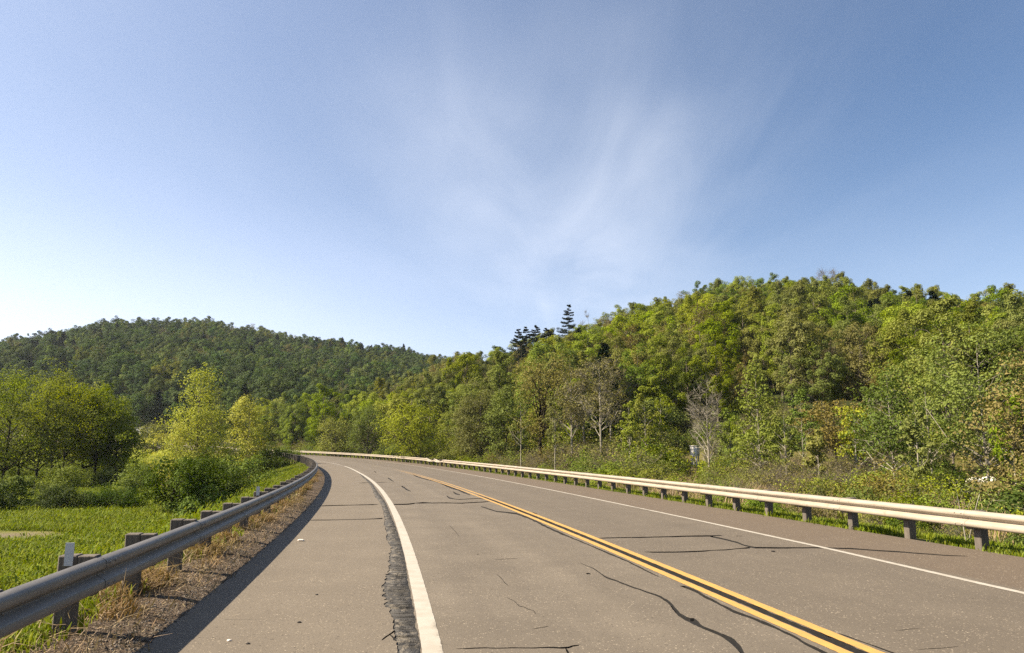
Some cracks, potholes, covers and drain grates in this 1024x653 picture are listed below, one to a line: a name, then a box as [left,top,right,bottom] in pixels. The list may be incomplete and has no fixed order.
crack [324,467,956,653]
